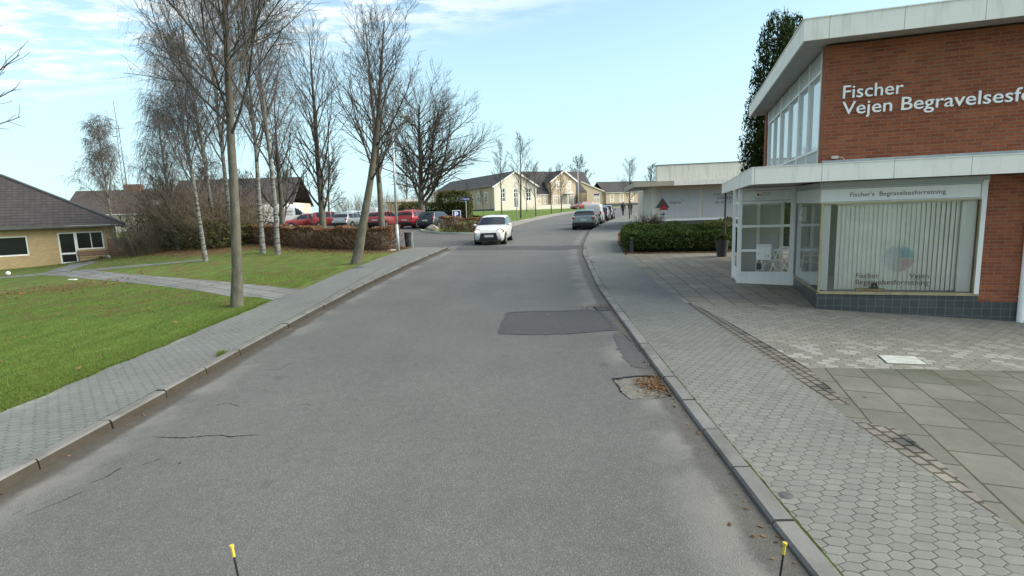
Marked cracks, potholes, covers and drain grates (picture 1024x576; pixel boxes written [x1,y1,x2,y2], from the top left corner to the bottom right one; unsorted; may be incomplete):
pothole [612,375,672,399]
crack [15,467,122,516]
crack [142,435,252,465]
manhole cover [878,355,928,365]
